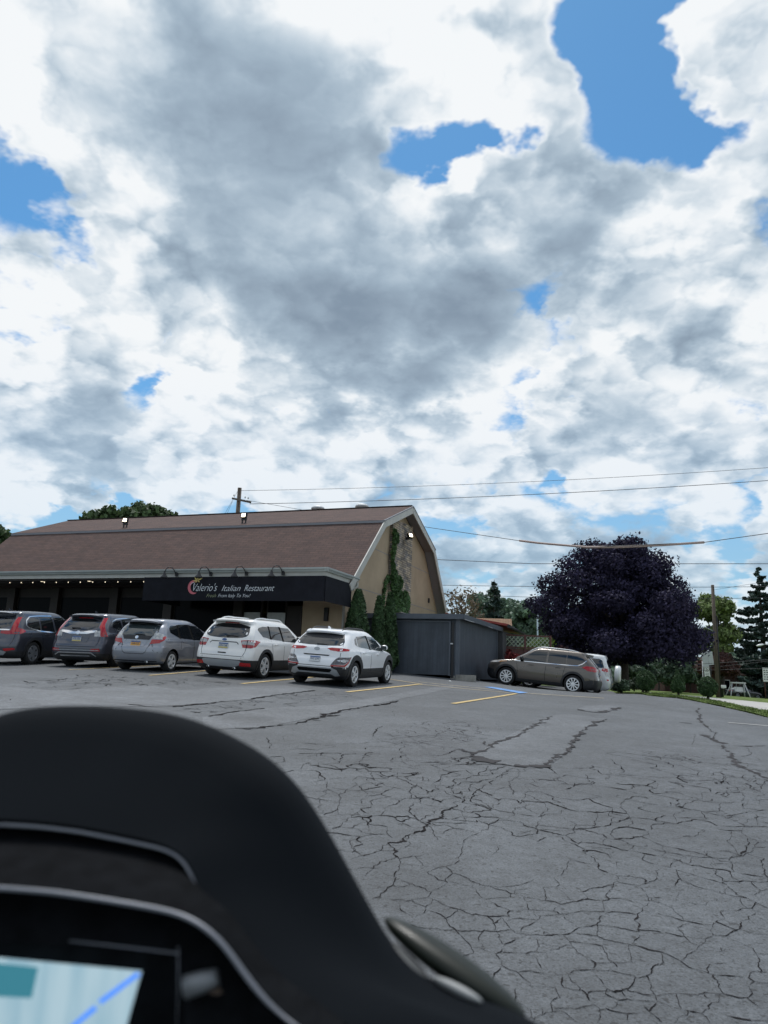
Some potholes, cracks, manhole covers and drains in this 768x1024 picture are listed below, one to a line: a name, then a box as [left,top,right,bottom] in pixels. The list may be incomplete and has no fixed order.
crack [272,708,768,1022]
crack [130,690,397,748]
